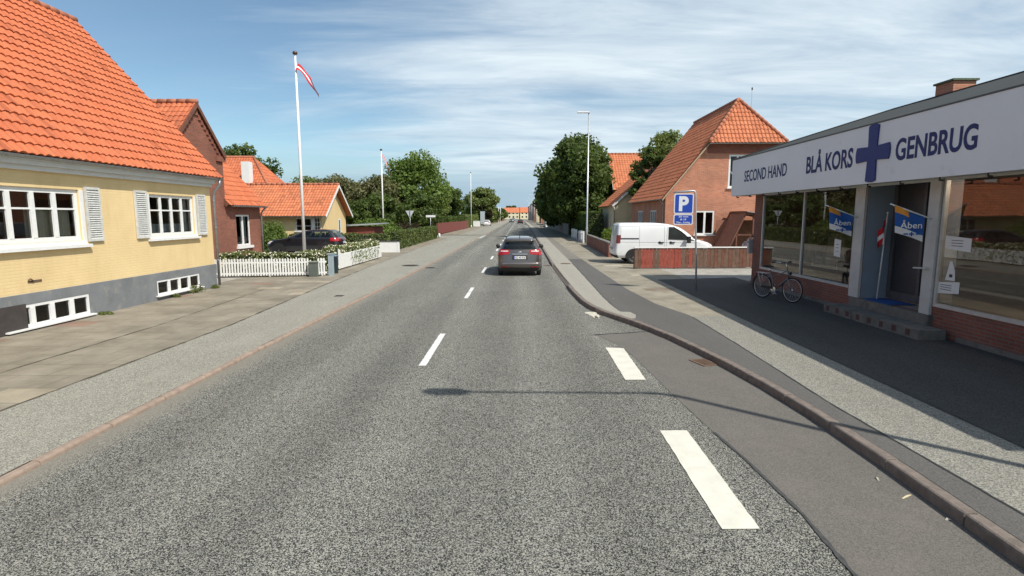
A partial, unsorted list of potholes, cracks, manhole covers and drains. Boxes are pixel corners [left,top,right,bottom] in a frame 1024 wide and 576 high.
drain grate [689,358,719,366]
